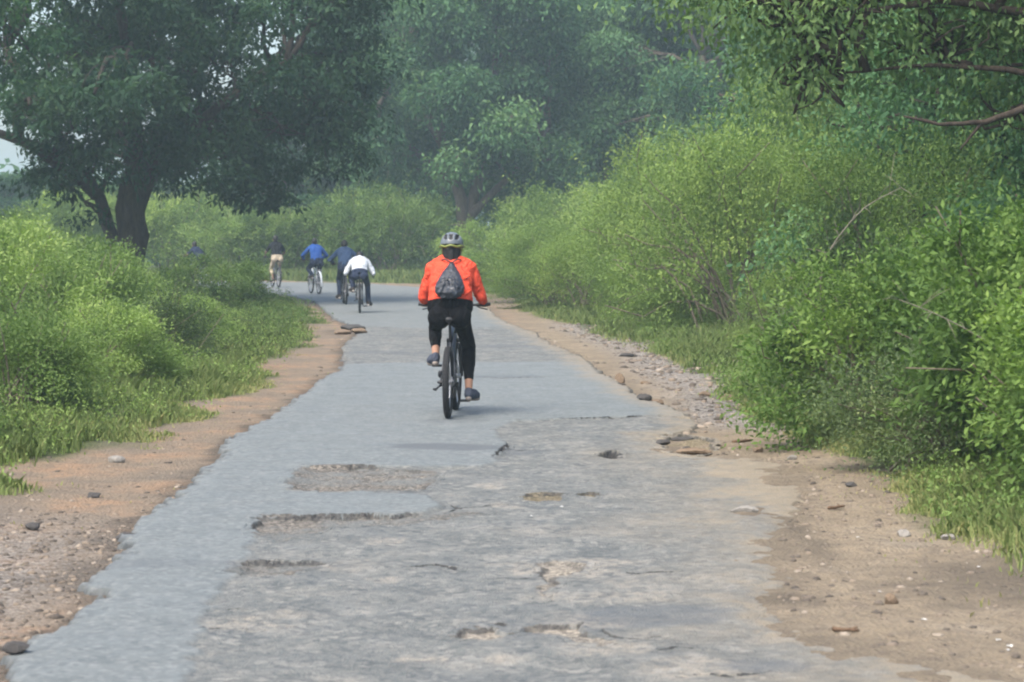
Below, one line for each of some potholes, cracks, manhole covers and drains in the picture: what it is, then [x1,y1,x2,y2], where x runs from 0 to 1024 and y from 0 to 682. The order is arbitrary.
pothole [508,491,572,503]
pothole [495,619,626,648]
pothole [277,463,447,493]
crack [485,442,549,458]
crack [396,563,537,582]
pothole [524,560,598,603]
pothole [439,623,528,642]
pothole [571,491,612,499]
pothole [214,559,332,578]
pothole [241,511,496,543]
